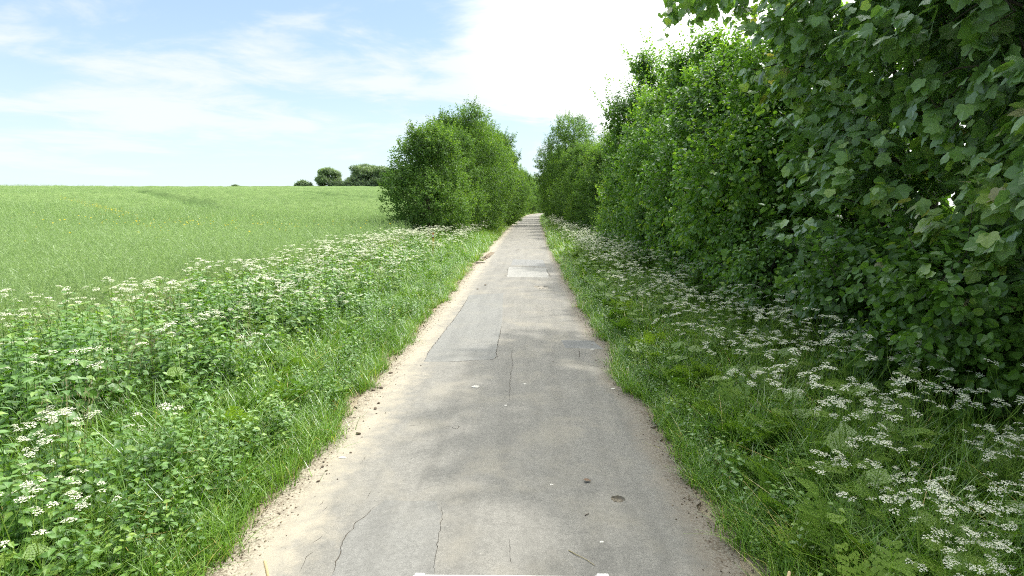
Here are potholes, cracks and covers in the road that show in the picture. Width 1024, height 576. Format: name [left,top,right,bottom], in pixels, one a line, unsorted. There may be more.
crack [425,300,513,401]
crack [300,493,371,572]
